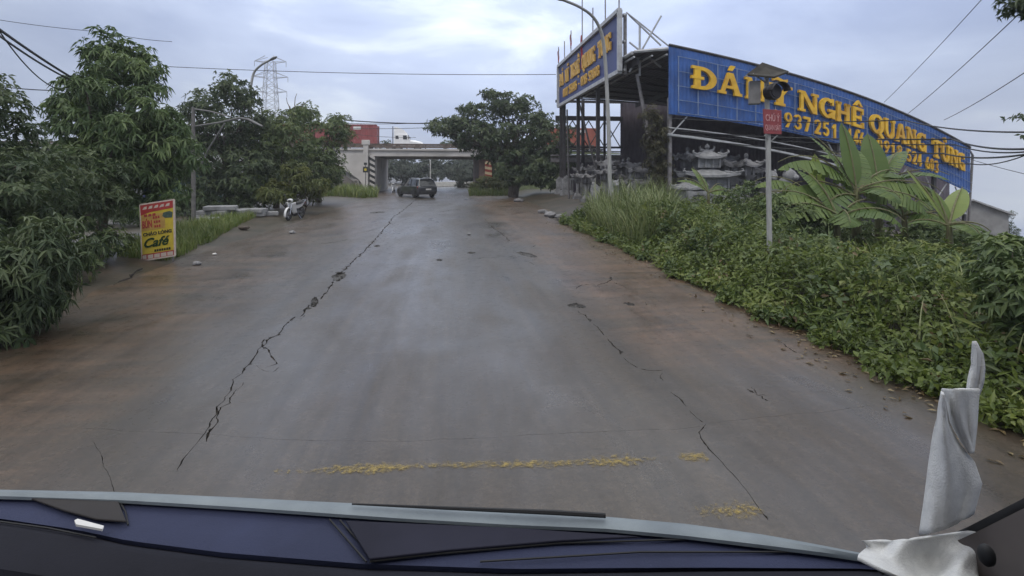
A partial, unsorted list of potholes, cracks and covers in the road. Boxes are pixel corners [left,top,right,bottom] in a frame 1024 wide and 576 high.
crack [177,200,415,470]
crack [578,311,857,520]
